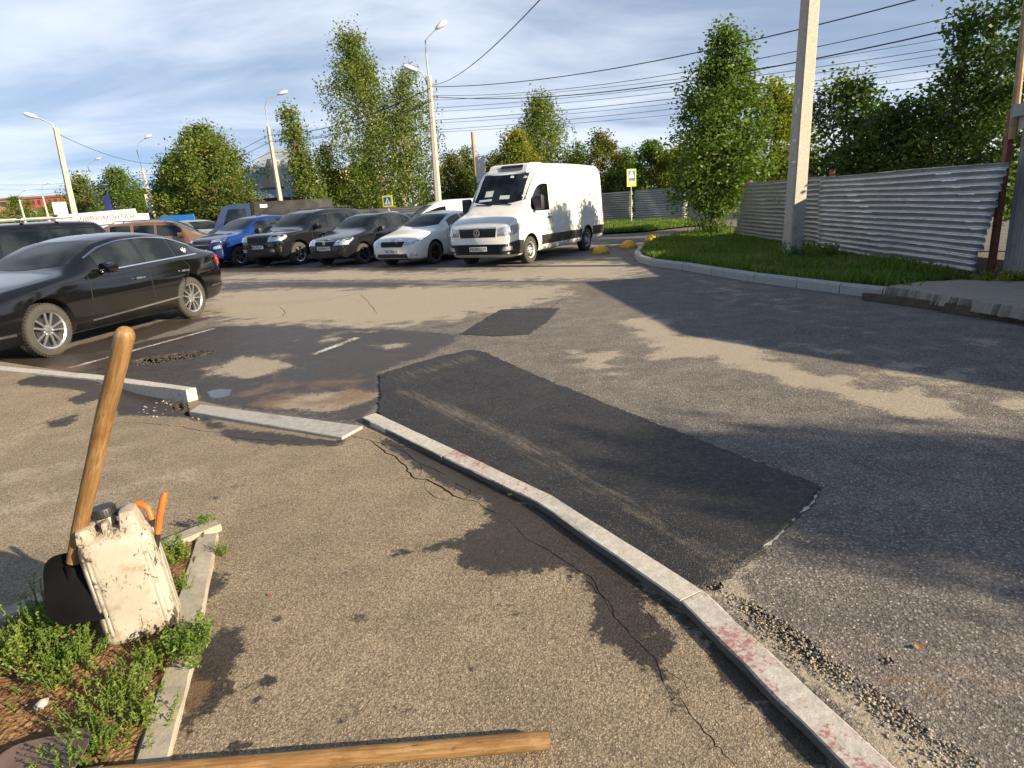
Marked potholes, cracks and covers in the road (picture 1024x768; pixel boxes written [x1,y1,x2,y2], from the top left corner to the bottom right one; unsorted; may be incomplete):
pothole [132,350,214,366]
crack [351,435,737,768]
